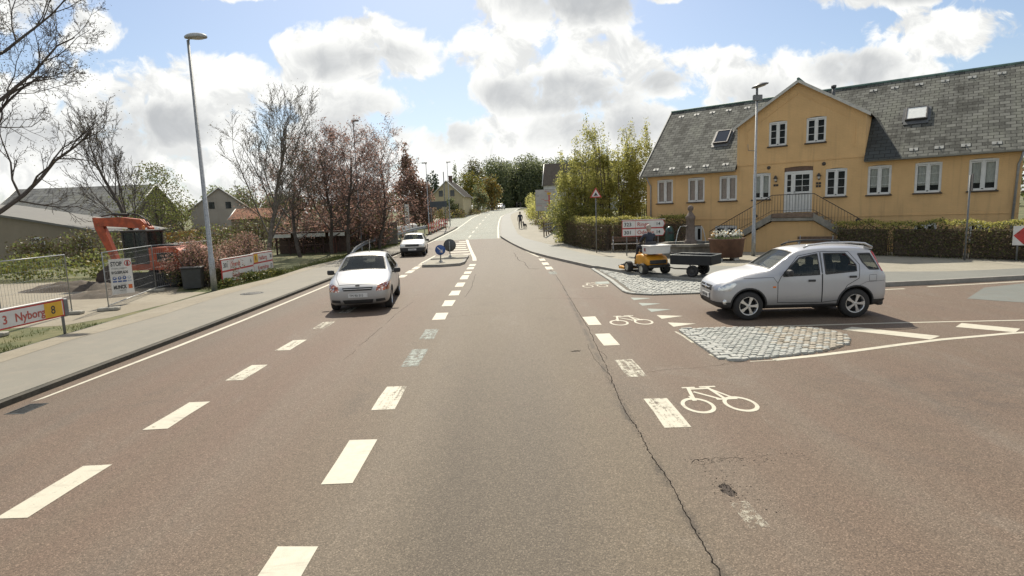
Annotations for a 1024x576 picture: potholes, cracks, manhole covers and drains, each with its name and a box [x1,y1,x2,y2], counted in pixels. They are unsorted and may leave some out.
pothole [718,483,737,497]
crack [537,255,809,576]
